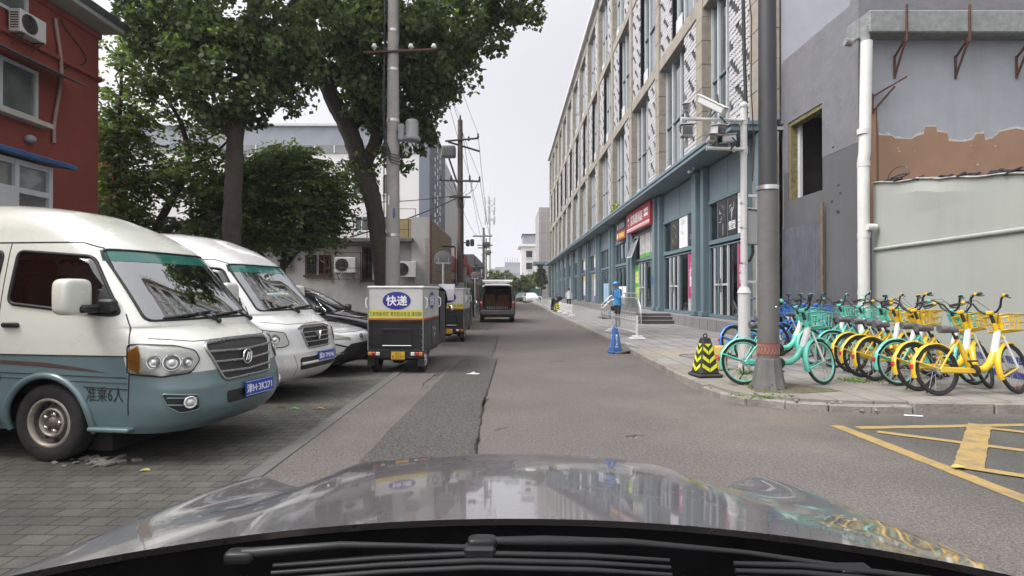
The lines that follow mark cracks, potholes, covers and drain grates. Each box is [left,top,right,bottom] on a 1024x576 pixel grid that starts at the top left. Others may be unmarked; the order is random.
crack [474,336,509,454]
